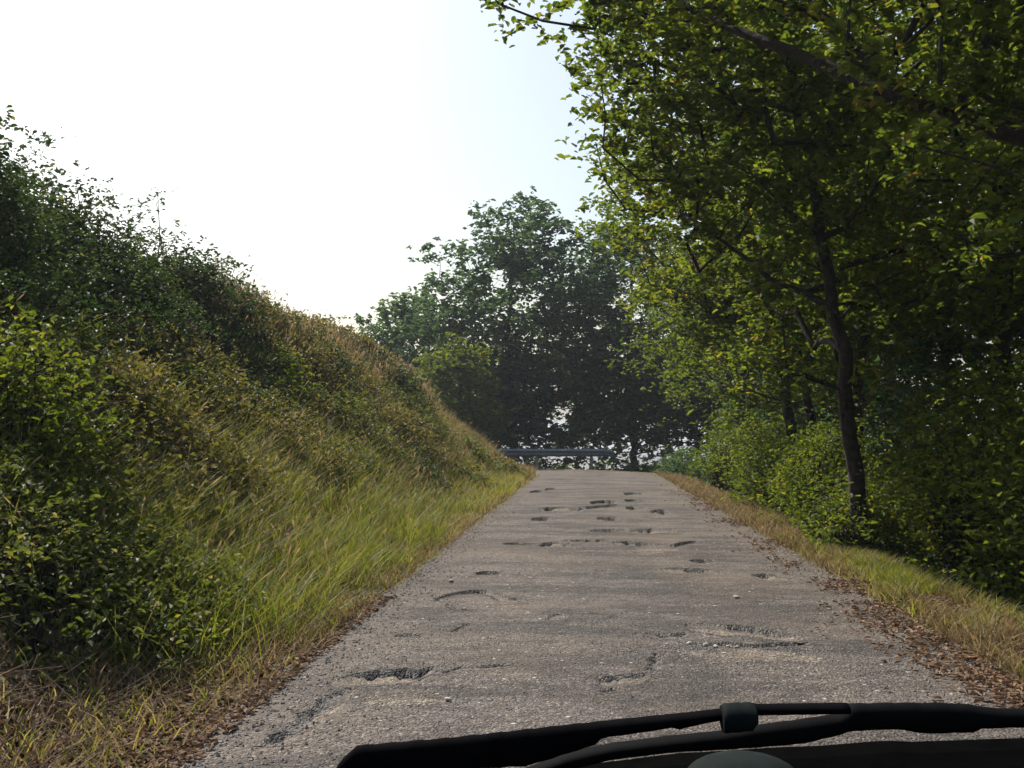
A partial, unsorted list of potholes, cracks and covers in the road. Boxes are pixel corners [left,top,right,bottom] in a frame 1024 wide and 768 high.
pothole [682,622,804,643]
pothole [332,664,439,688]
pothole [594,670,652,688]
pothole [428,589,527,603]
